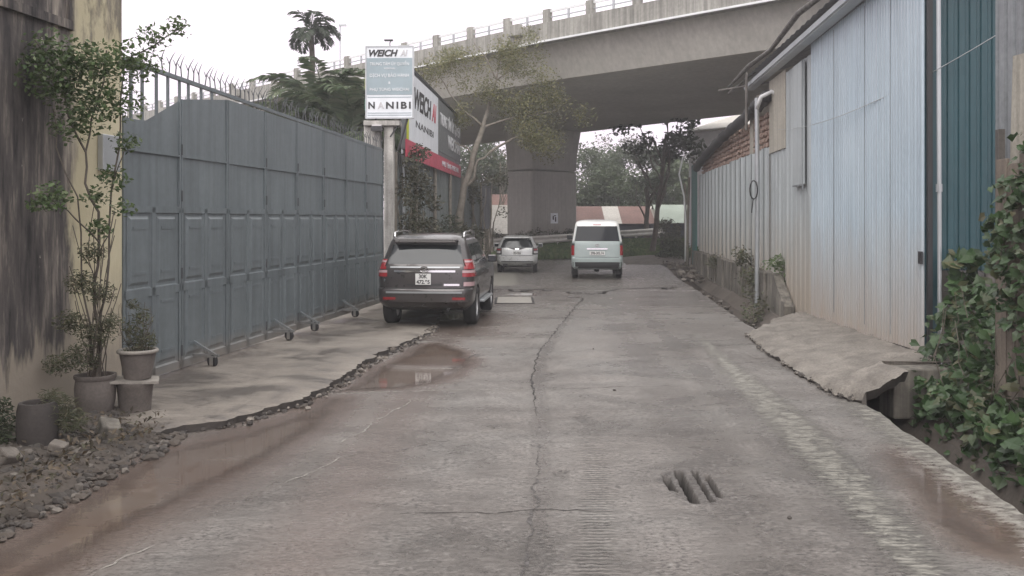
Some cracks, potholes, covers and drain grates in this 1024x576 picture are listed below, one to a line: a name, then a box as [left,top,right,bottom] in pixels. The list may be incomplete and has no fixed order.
crack [400,451,611,574]
crack [285,399,411,483]
